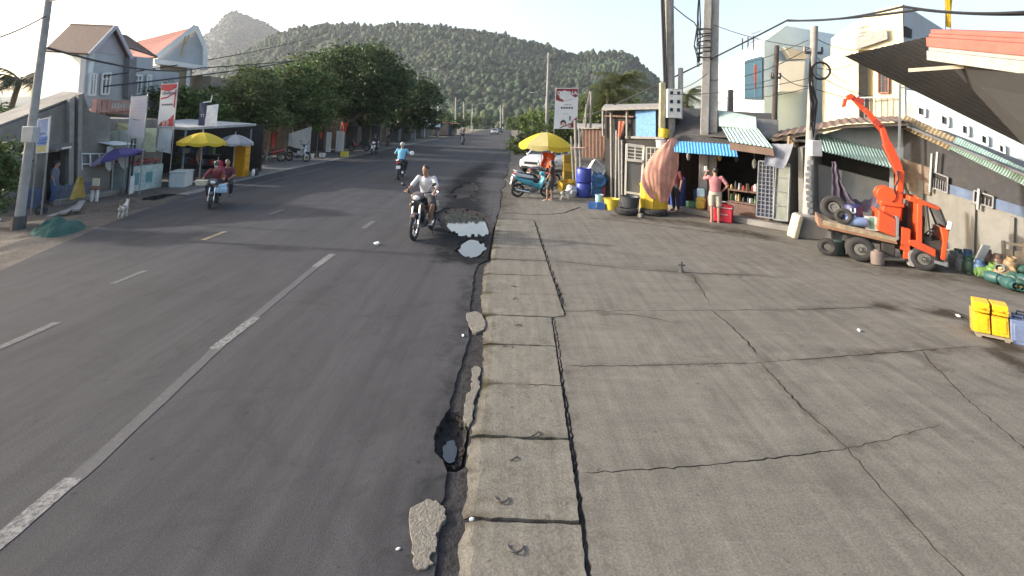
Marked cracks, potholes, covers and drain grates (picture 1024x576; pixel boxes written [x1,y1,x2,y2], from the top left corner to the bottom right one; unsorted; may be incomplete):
pothole [434,415,467,472]
pothole [453,238,488,258]
crack [506,207,1024,576]
pothole [450,182,479,199]
pothole [436,207,492,237]
